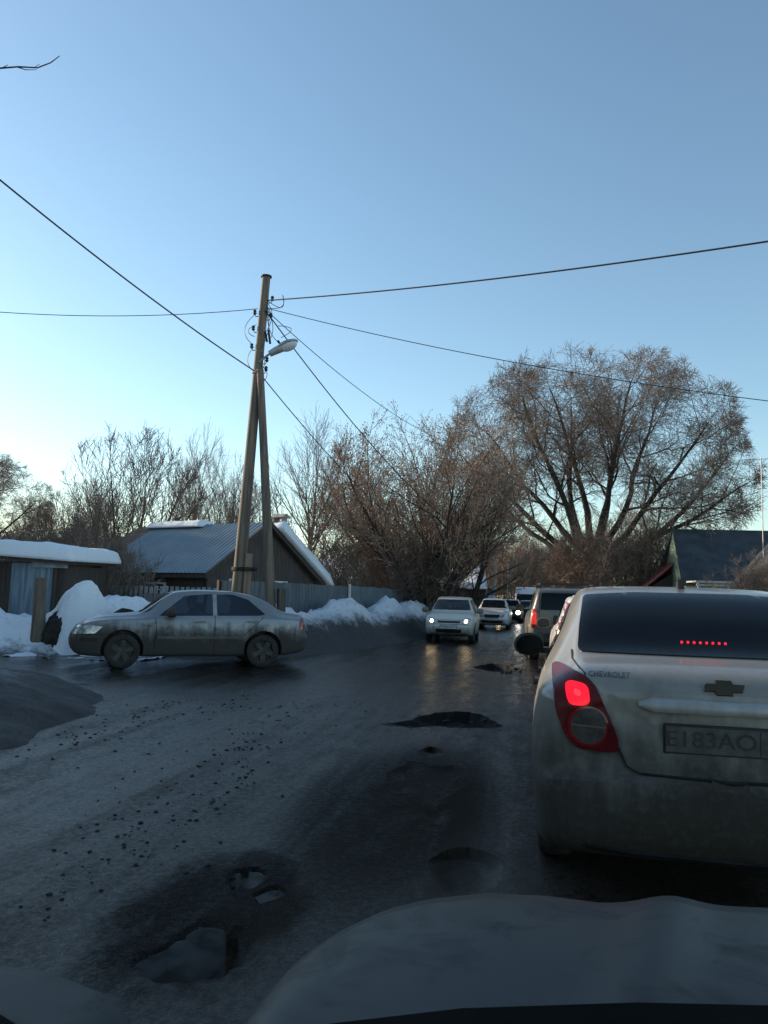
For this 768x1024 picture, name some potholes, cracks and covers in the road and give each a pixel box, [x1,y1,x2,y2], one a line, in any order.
pothole [251,884,289,904]
pothole [474,663,526,673]
pothole [117,915,265,991]
pothole [224,865,274,892]
pothole [417,746,444,758]
pothole [427,847,504,897]
pothole [373,761,467,835]
pothole [381,711,503,728]
